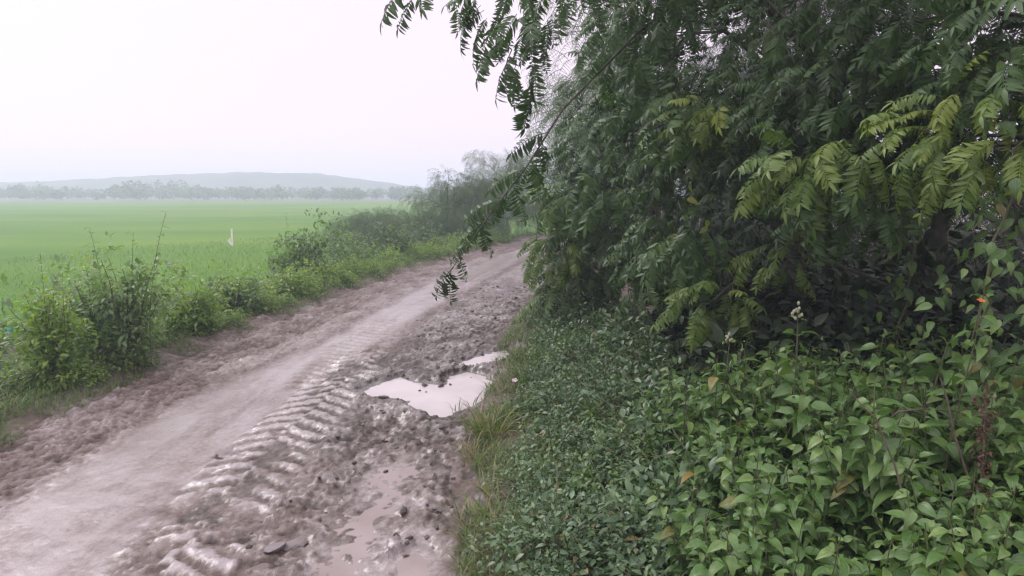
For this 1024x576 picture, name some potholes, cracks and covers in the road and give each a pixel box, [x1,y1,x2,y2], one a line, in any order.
pothole [356,365,499,418]
